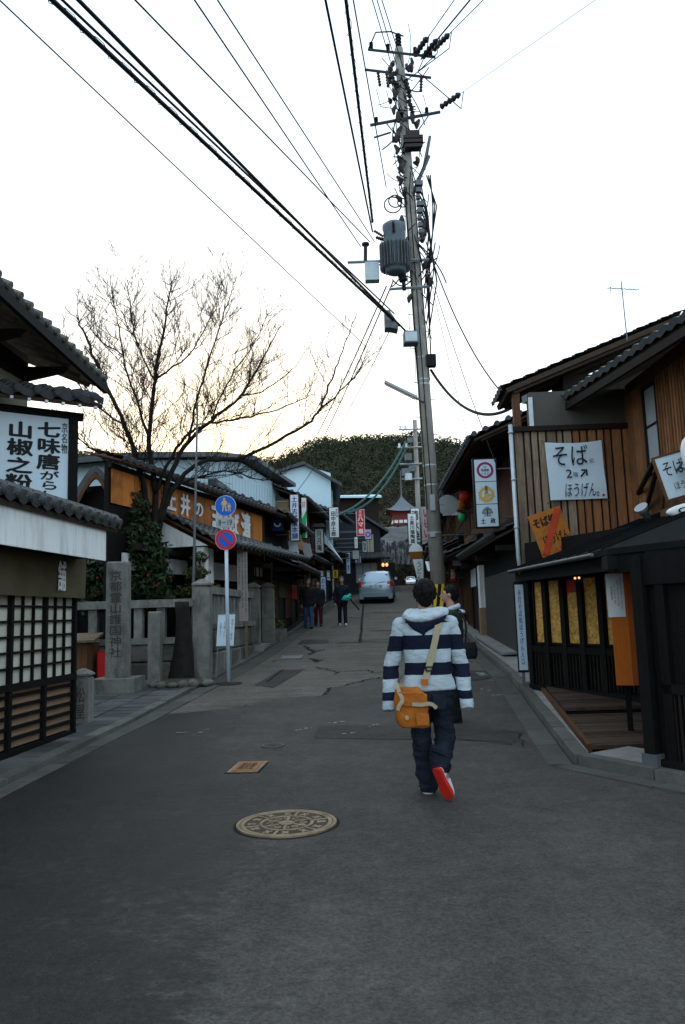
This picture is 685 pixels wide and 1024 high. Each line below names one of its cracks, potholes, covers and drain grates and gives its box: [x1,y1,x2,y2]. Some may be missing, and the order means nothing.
manhole cover [233,809,340,839]
crack [267,646,375,698]
manhole cover [224,761,268,774]
